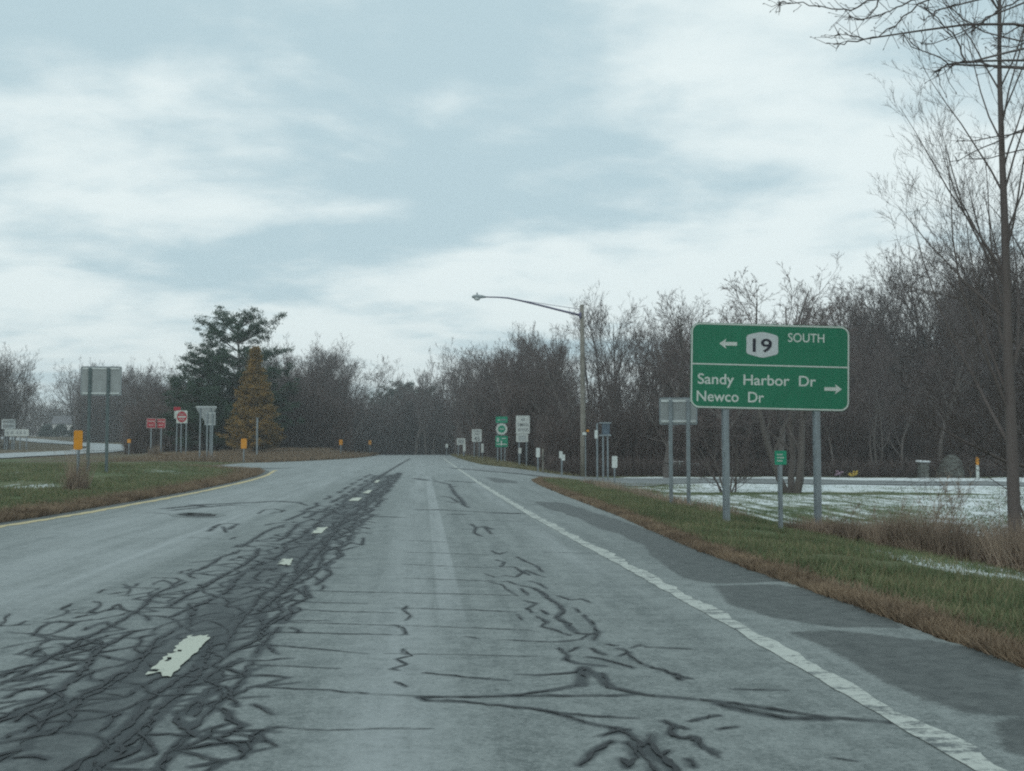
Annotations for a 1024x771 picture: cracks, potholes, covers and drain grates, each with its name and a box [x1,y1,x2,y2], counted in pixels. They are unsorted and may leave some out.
crack [0,473,885,771]
